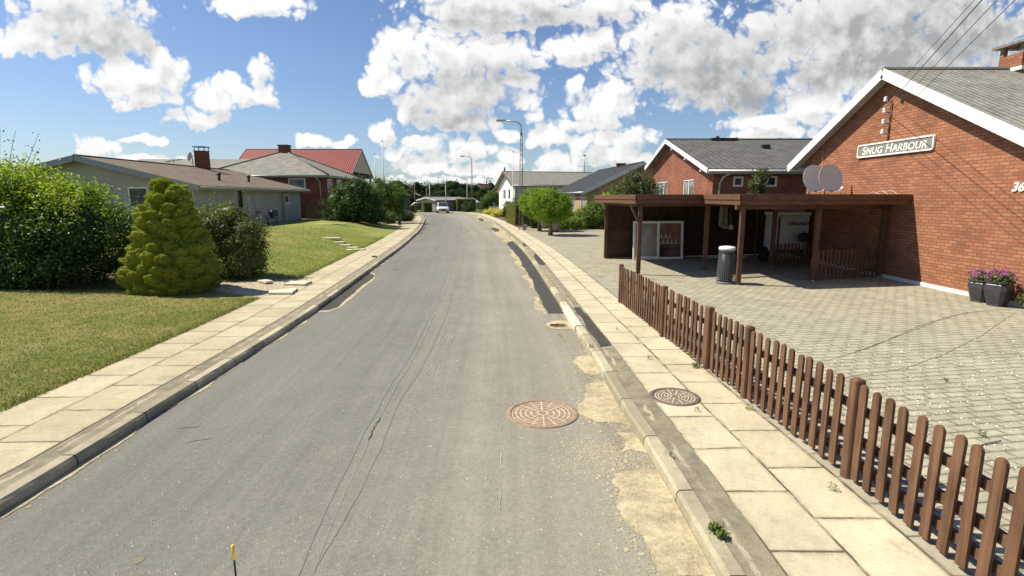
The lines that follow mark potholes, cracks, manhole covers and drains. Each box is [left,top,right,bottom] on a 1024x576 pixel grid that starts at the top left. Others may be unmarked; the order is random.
manhole cover [507,399,578,429]
crack [313,223,470,575]
manhole cover [649,388,701,406]
